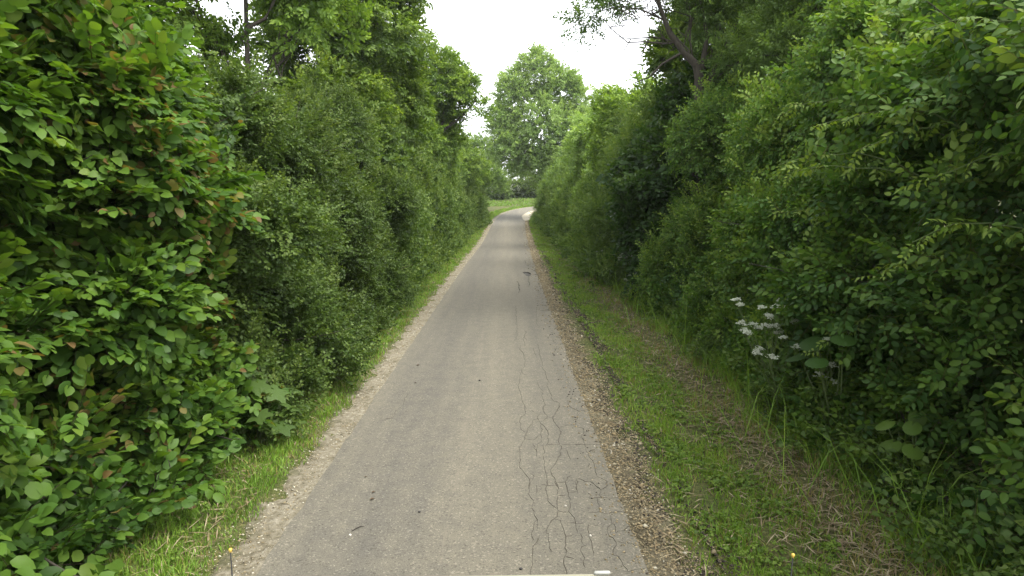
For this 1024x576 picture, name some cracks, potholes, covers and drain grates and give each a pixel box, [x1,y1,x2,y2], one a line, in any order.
crack [515,307,645,574]
